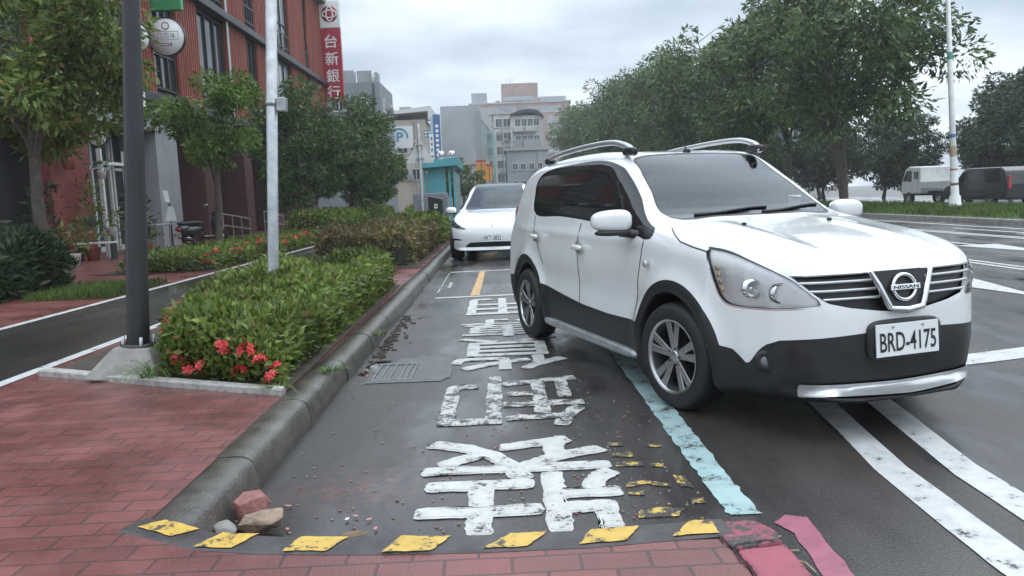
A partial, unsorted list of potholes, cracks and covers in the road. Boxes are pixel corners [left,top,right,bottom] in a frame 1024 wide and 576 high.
drain grate [371,363,419,380]
